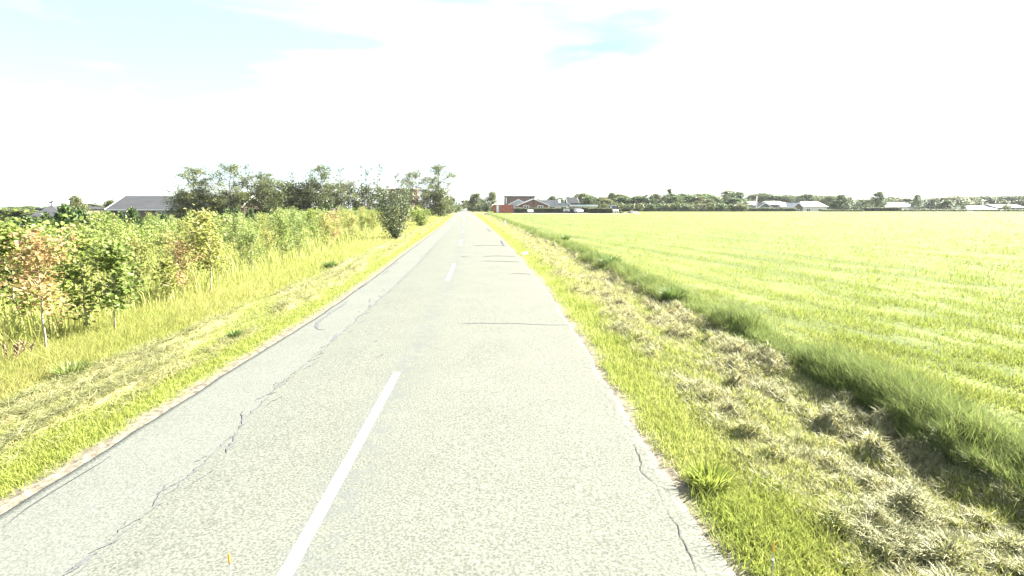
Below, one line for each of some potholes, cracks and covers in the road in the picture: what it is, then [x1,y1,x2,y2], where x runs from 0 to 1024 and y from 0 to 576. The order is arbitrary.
crack [635,446,697,571]
crack [61,229,450,576]
